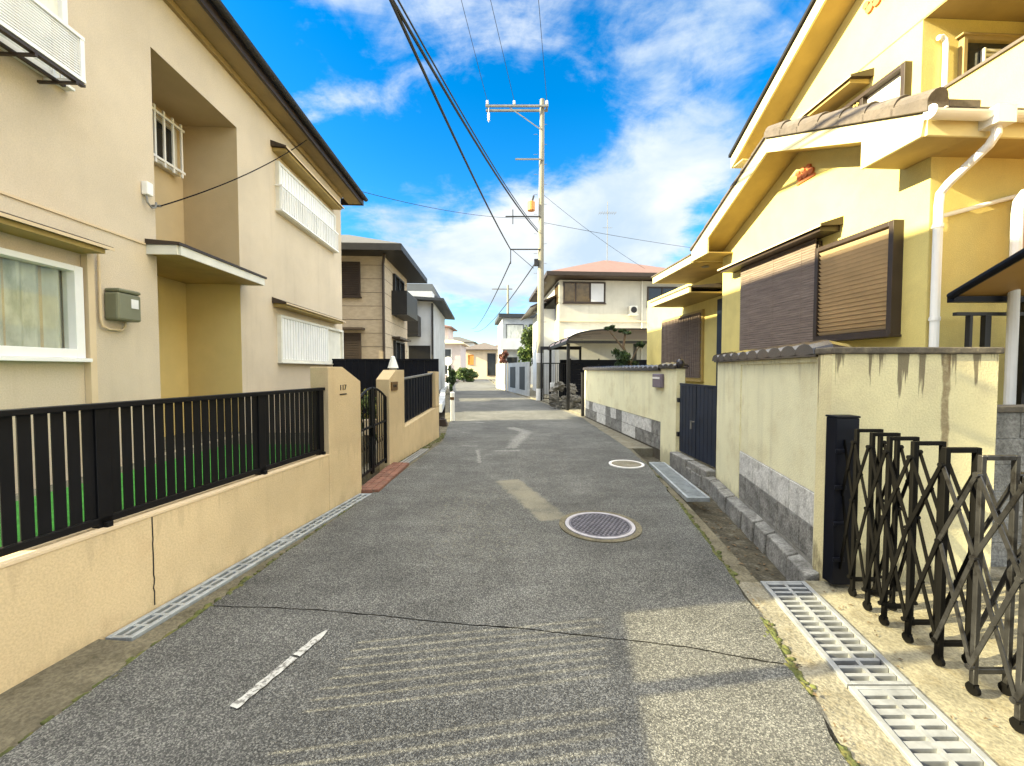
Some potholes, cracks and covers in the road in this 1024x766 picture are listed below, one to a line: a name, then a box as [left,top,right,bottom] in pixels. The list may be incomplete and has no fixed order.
manhole cover [609,460,644,469]
drain grate [105,539,296,641]
drain grate [280,493,372,541]
drain grate [848,686,997,766]
manhole cover [559,510,642,543]
crack [222,606,802,667]
drain grate [760,581,912,689]
drain grate [649,462,710,502]
